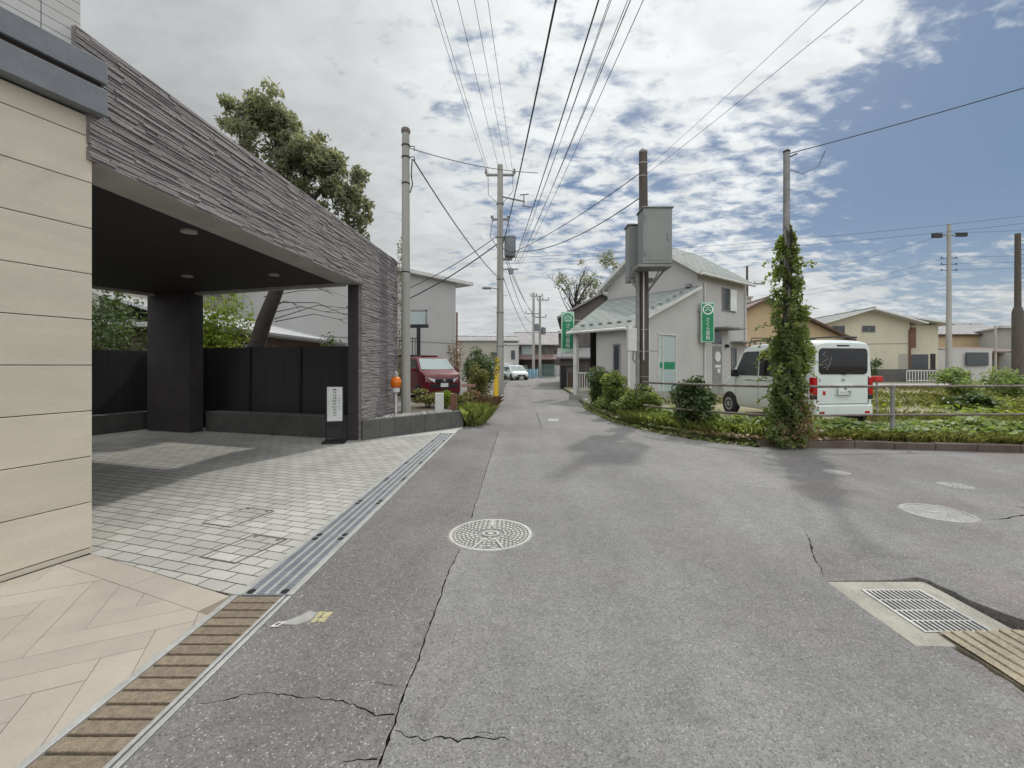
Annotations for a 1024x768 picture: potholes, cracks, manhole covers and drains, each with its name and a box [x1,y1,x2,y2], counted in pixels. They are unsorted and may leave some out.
manhole cover [897,503,981,524]
drain grate [420,441,445,451]
drain grate [242,537,346,597]
manhole cover [447,519,534,552]
drain grate [431,433,453,441]
drain grate [356,479,406,502]
drain grate [385,463,422,479]
drain grate [314,502,382,537]
drain grate [404,450,436,463]
crack [202,692,516,743]
